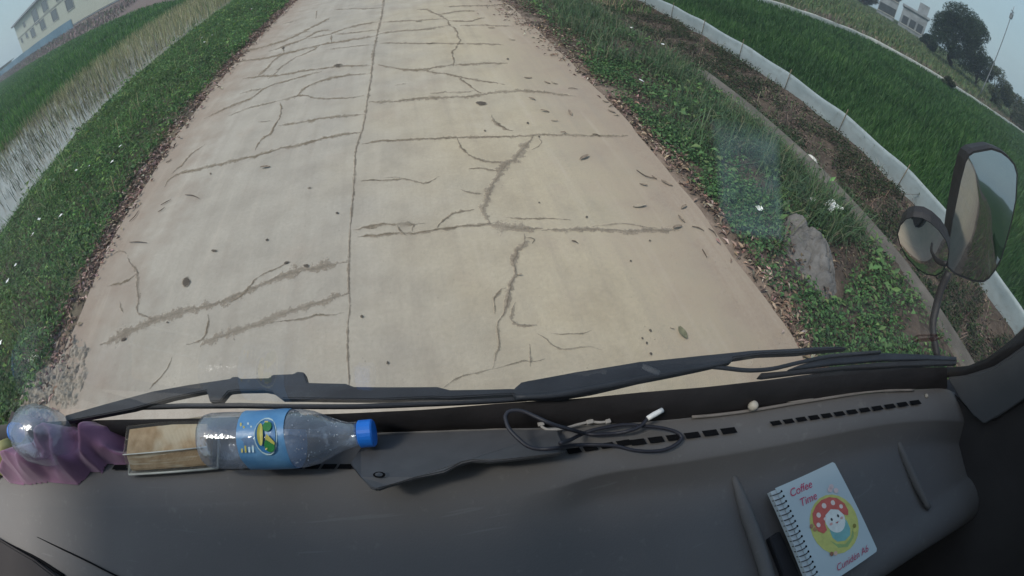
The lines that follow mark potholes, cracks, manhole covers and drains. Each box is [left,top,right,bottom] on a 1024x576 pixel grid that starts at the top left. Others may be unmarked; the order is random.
crack [101,251,345,348]
crack [360,120,569,366]
crack [212,4,505,147]
